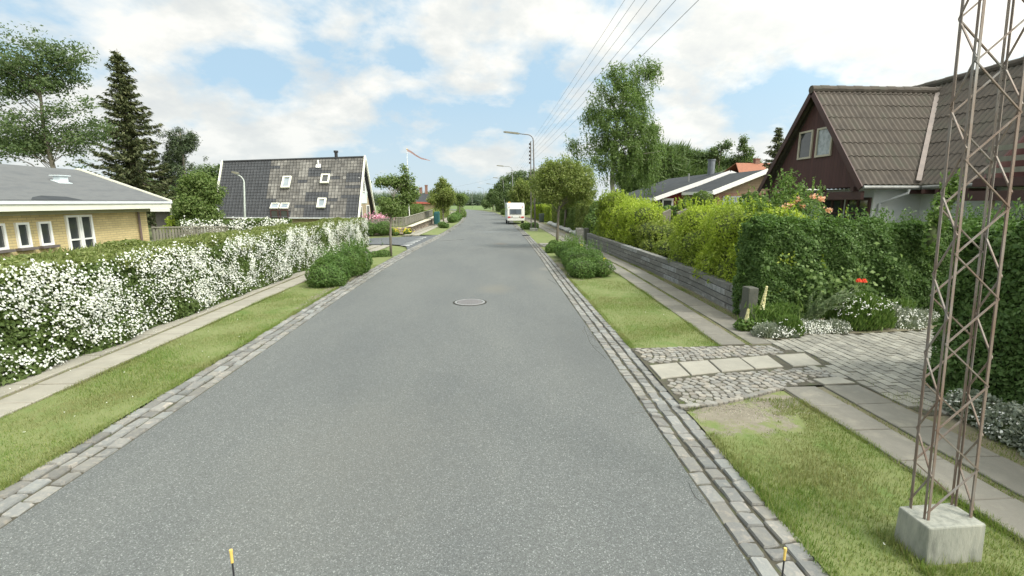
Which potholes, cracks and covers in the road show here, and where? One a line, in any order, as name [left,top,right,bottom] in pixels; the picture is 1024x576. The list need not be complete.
crack [582,327,607,360]
